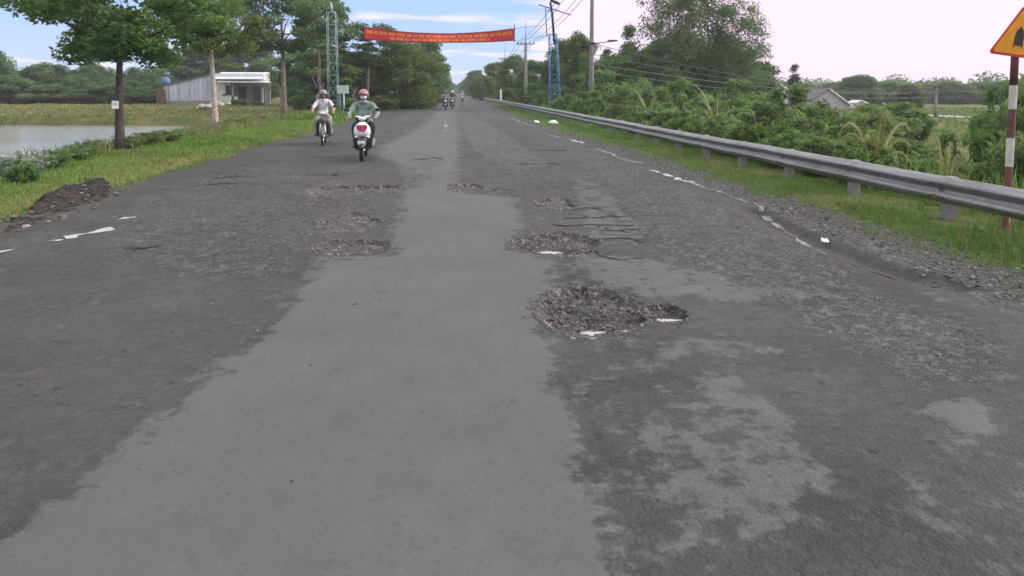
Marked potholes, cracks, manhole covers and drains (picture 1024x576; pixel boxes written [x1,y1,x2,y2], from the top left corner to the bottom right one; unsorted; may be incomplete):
pothole [505,230,611,259]
pothole [314,211,386,235]
pothole [298,184,409,199]
pothole [532,197,577,211]
crack [552,206,645,260]
pothole [445,183,486,192]
pothole [523,281,666,344]
pothole [632,301,691,327]
pothole [309,239,393,258]
